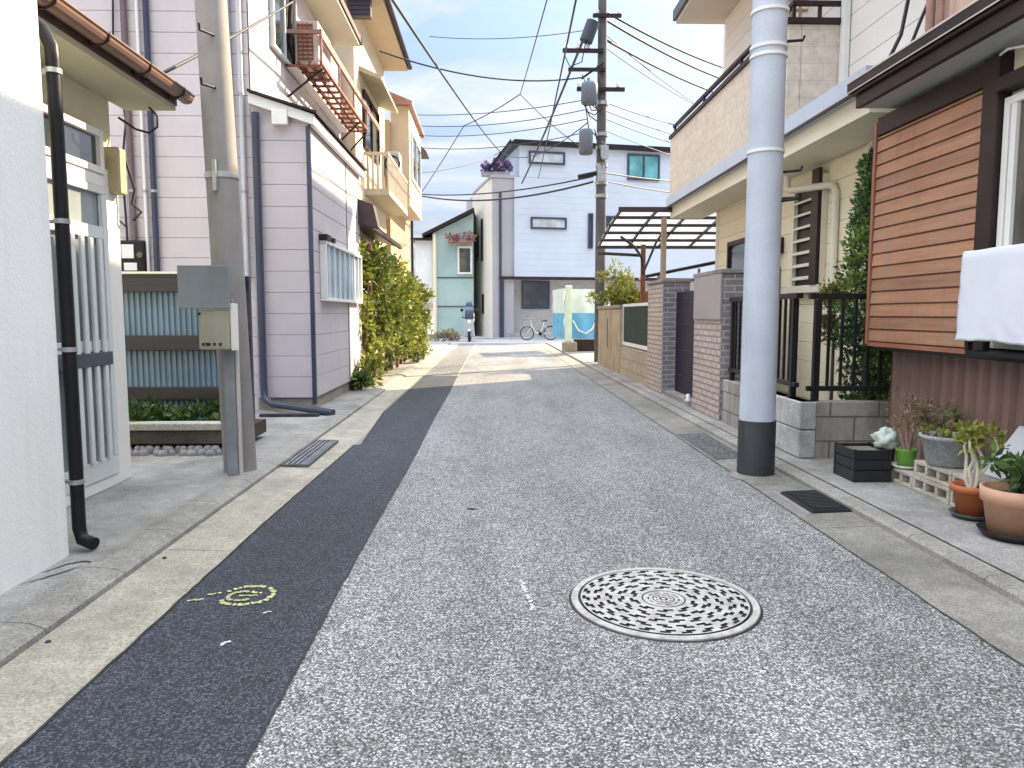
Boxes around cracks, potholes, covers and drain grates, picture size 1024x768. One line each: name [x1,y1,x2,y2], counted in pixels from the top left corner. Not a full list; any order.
drain grate [770,490,852,515]
manhole cover [569,568,763,643]
drain grate [280,439,339,467]
